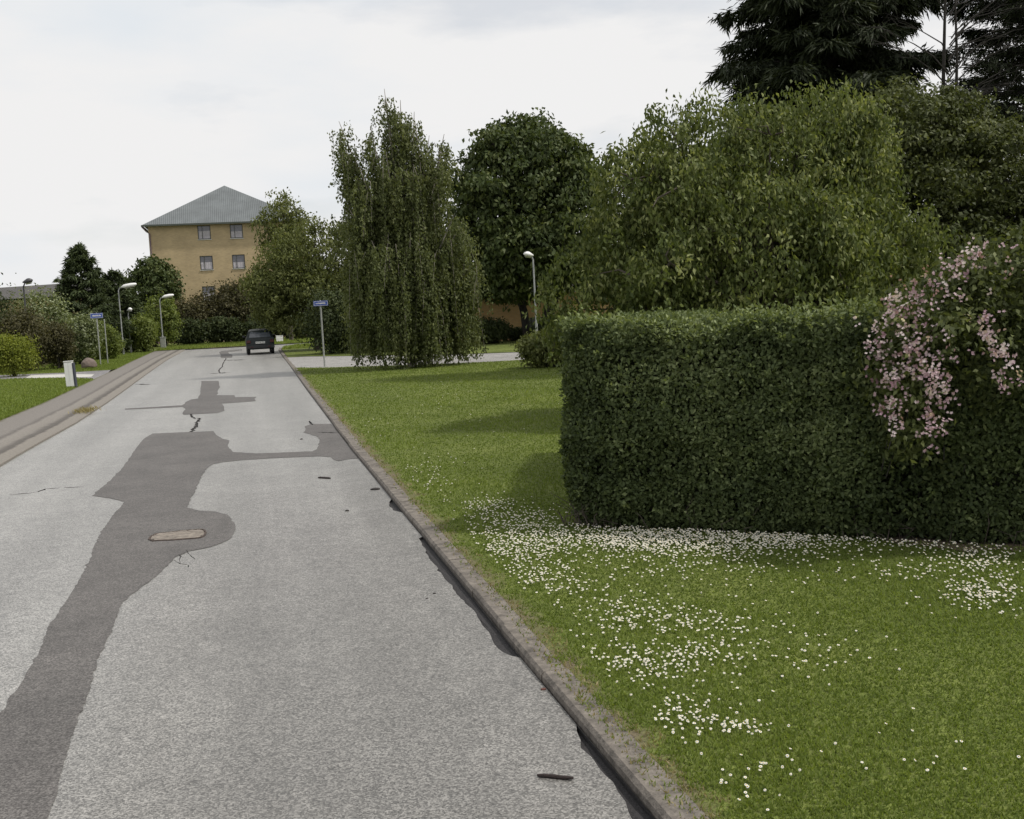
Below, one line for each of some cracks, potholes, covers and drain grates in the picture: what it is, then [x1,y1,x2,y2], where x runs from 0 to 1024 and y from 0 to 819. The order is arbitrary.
manhole cover [148,529,207,542]
crack [189,414,201,432]
